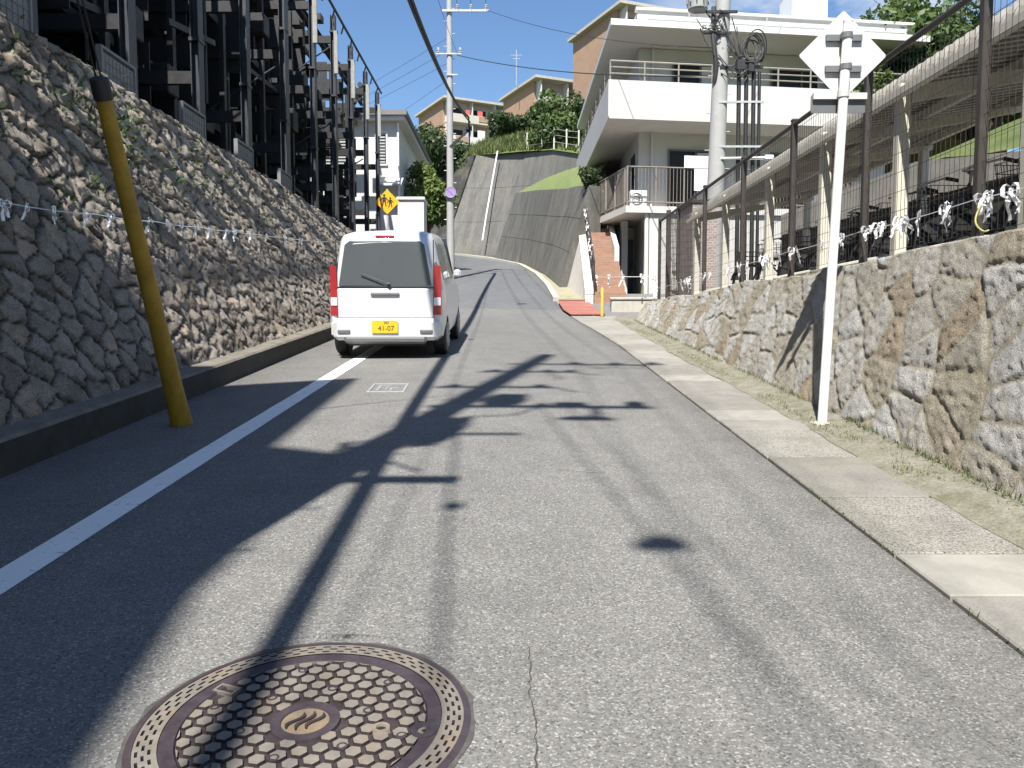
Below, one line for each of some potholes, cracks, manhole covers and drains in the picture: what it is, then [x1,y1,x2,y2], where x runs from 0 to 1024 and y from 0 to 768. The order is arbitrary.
crack [527,644,538,768]
manhole cover [121,642,471,768]
